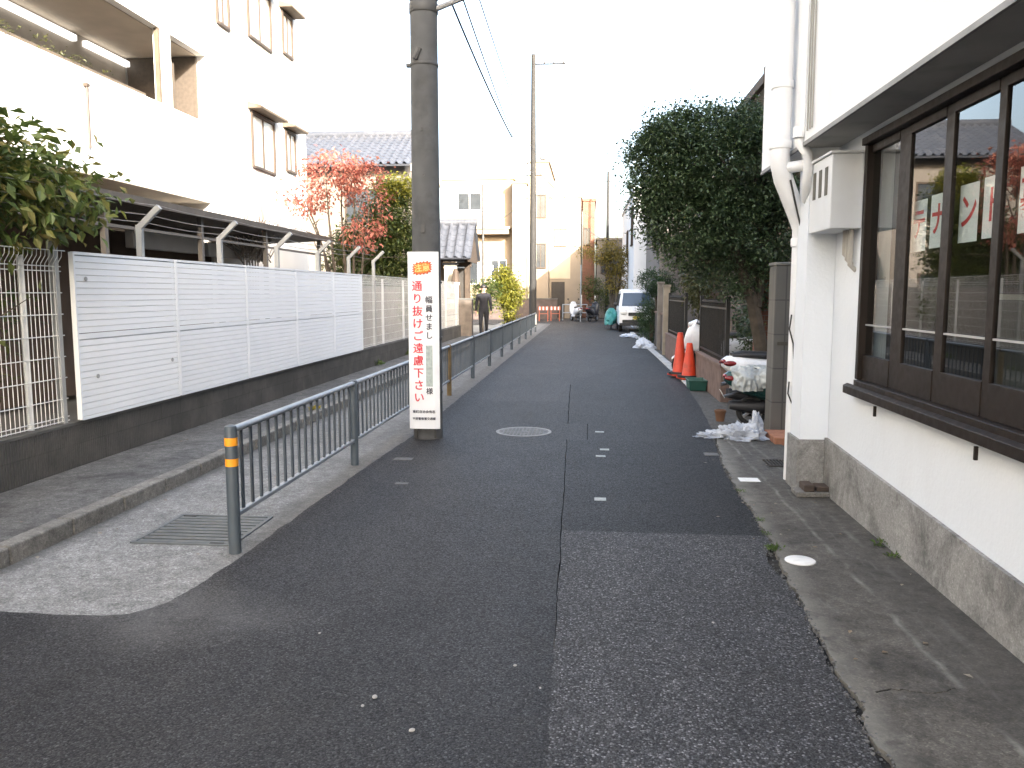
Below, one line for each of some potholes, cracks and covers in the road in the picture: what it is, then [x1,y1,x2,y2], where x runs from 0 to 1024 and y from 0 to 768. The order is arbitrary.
manhole cover [496,427,551,436]
drain grate [762,459,784,467]
manhole cover [783,555,817,566]
drain grate [130,514,273,546]
